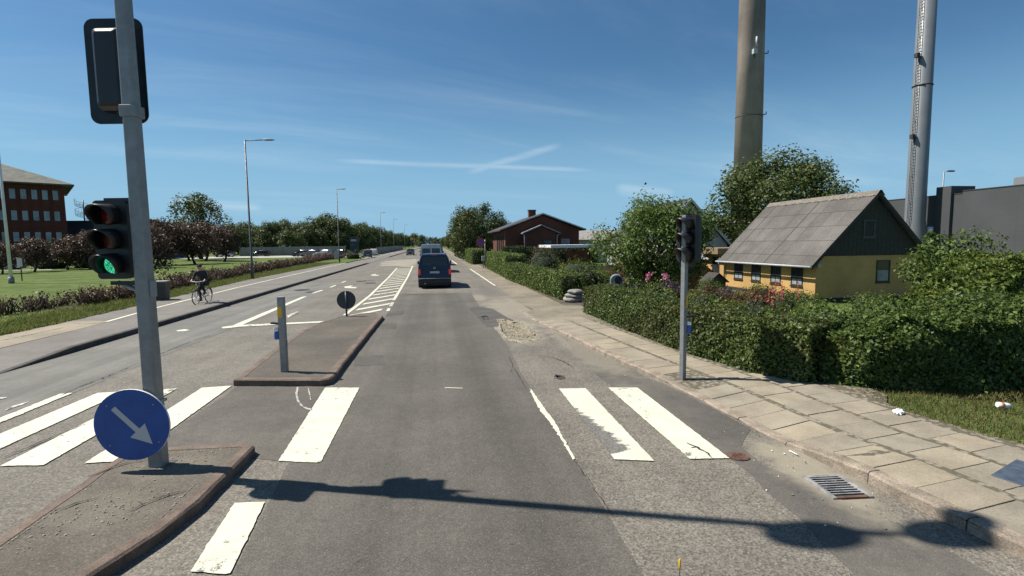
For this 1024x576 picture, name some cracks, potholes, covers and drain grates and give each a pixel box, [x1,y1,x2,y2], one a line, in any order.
manhole cover [727,451,750,461]
pothole [496,318,542,344]
drain grate [802,474,874,500]
